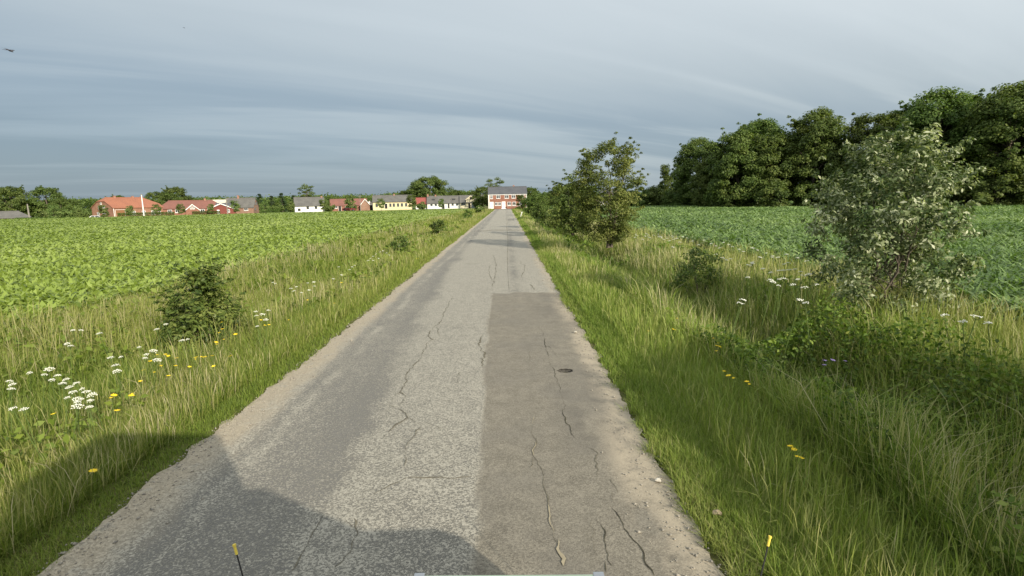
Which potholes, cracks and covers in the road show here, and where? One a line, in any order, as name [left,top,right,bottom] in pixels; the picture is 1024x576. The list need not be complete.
crack [335,518,358,567]
crack [590,449,654,574]
crack [375,296,468,493]
crack [529,417,566,566]
